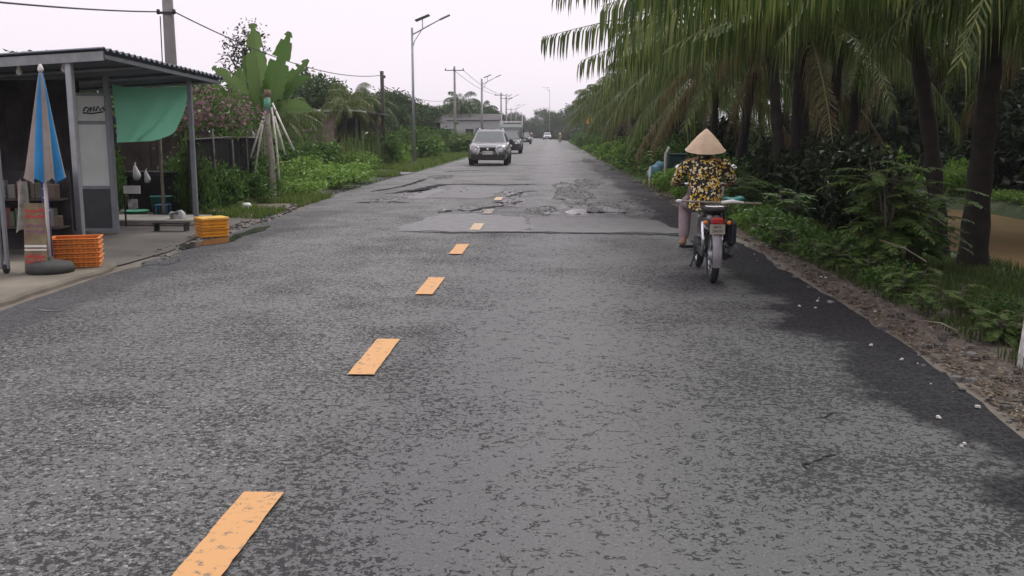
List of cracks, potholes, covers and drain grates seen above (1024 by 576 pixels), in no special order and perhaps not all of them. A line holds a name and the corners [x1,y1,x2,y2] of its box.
pothole [398,186,441,197]
pothole [574,178,606,190]
pothole [542,205,625,216]
pothole [494,196,529,207]
pothole [552,182,596,207]
